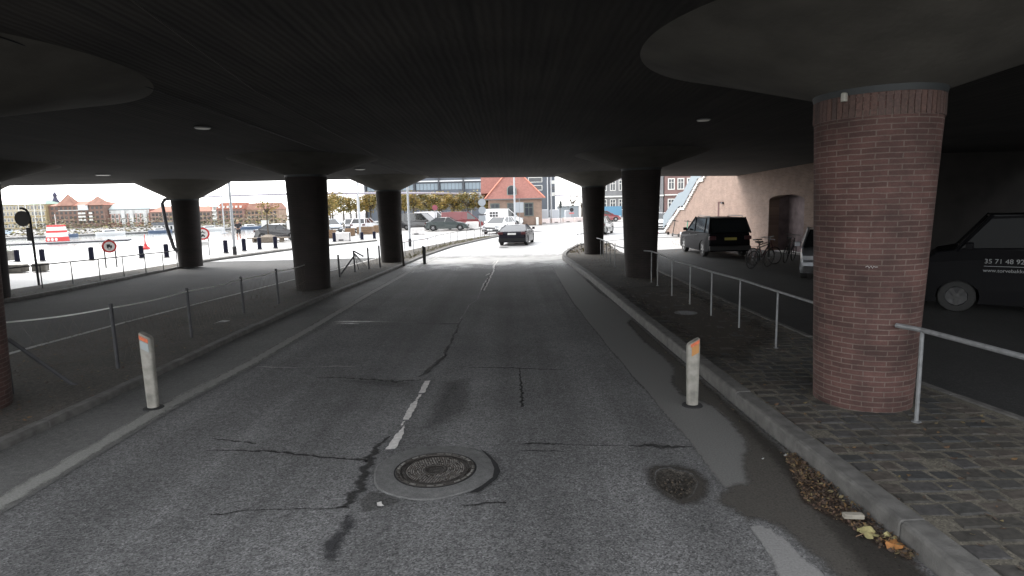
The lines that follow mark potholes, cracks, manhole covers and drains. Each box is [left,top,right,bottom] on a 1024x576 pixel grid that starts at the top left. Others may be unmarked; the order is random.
pothole [655,468,698,500]
crack [469,367,561,407]
crack [465,449,506,506]
manhole cover [373,446,500,501]
crack [211,506,349,515]
crack [206,439,368,461]
crack [523,443,694,452]
